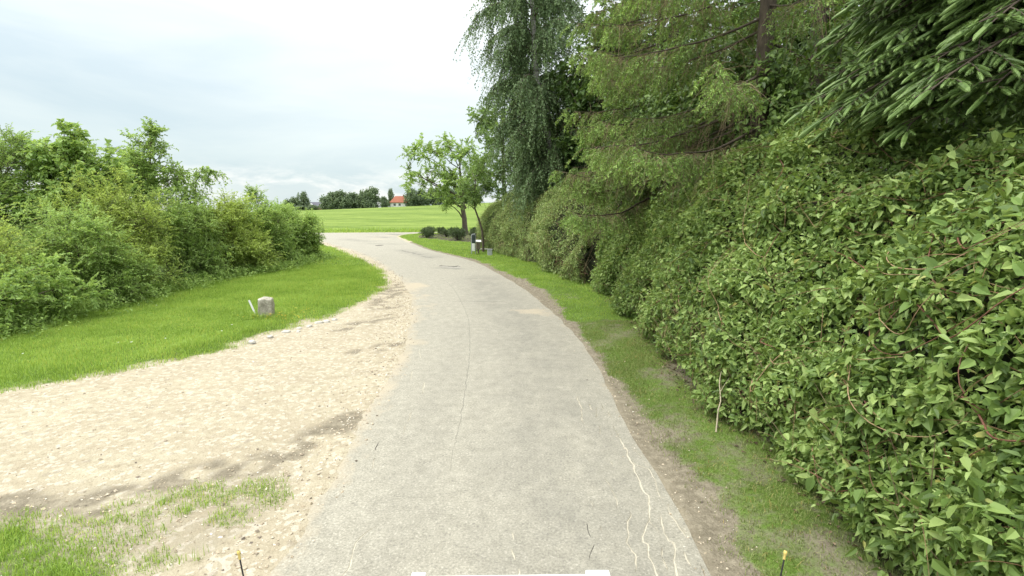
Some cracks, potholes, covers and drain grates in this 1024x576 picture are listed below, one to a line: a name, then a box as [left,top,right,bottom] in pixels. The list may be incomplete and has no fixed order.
crack [342,527,375,576]
